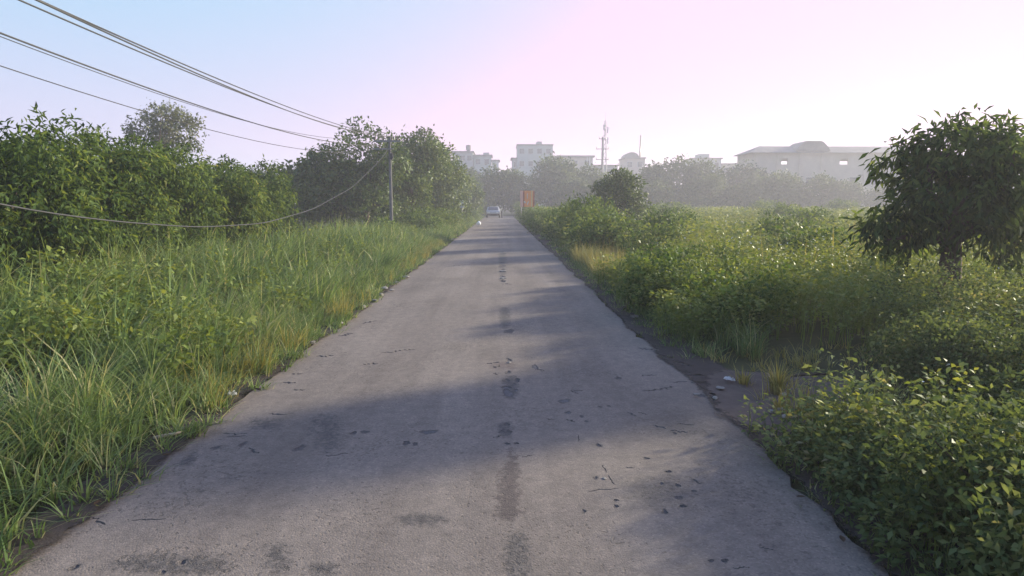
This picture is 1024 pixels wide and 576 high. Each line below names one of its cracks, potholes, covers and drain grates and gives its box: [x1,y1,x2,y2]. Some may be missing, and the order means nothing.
crack [593,465,632,491]
